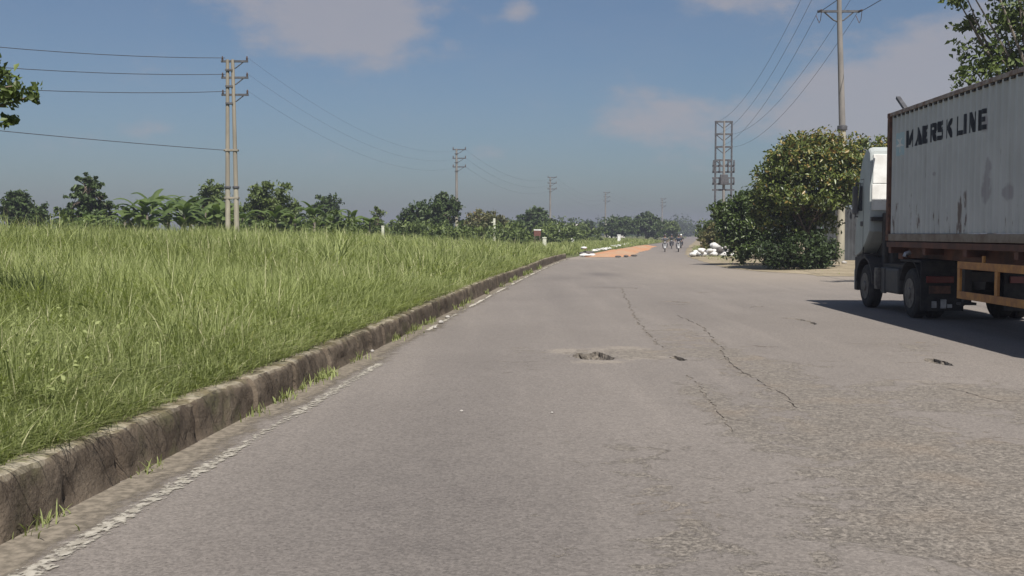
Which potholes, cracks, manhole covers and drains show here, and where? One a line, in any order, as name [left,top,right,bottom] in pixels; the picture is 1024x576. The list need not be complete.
pothole [572,351,615,360]
crack [622,288,664,348]
pothole [924,358,953,366]
crack [663,292,817,408]
crack [686,375,746,432]
